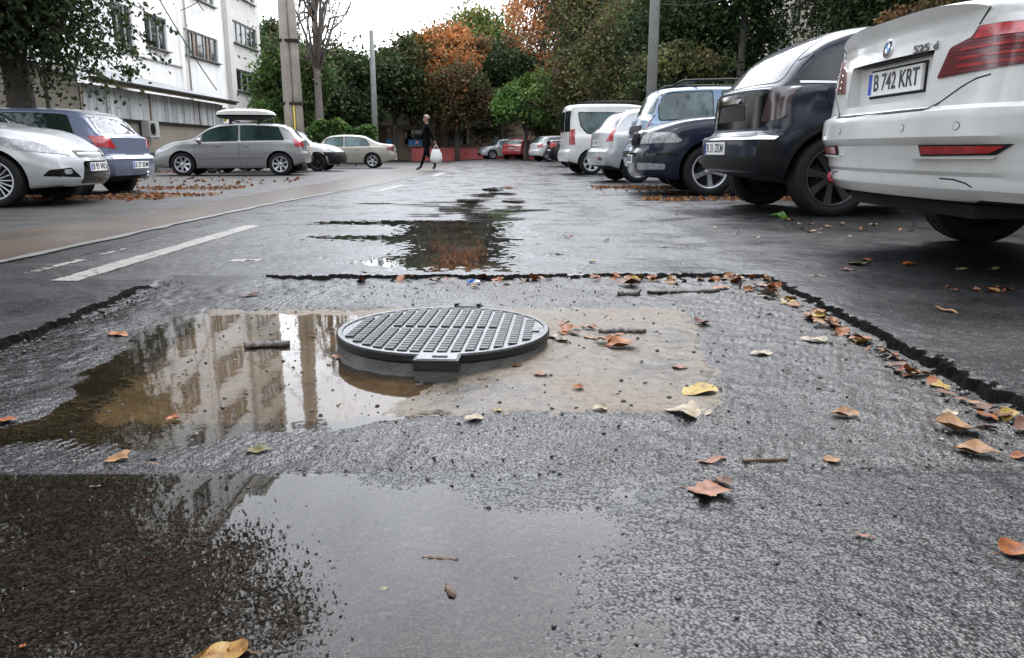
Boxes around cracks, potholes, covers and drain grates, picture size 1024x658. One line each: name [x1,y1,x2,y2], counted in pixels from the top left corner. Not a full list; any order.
manhole cover [333,302,549,383]
